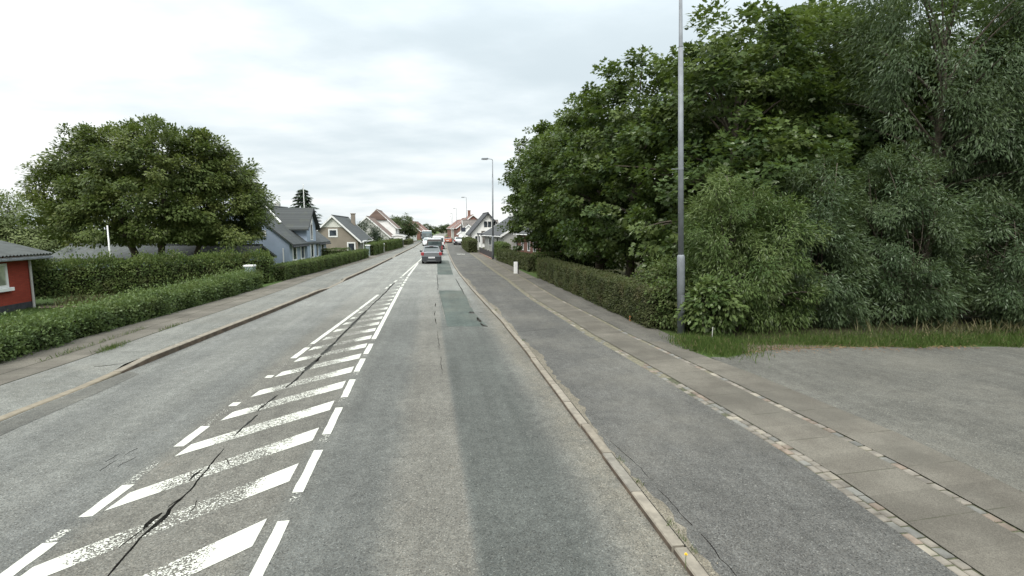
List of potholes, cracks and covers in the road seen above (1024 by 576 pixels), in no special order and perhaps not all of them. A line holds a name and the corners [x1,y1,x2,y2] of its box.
crack [101,283,394,576]
crack [610,441,735,574]
